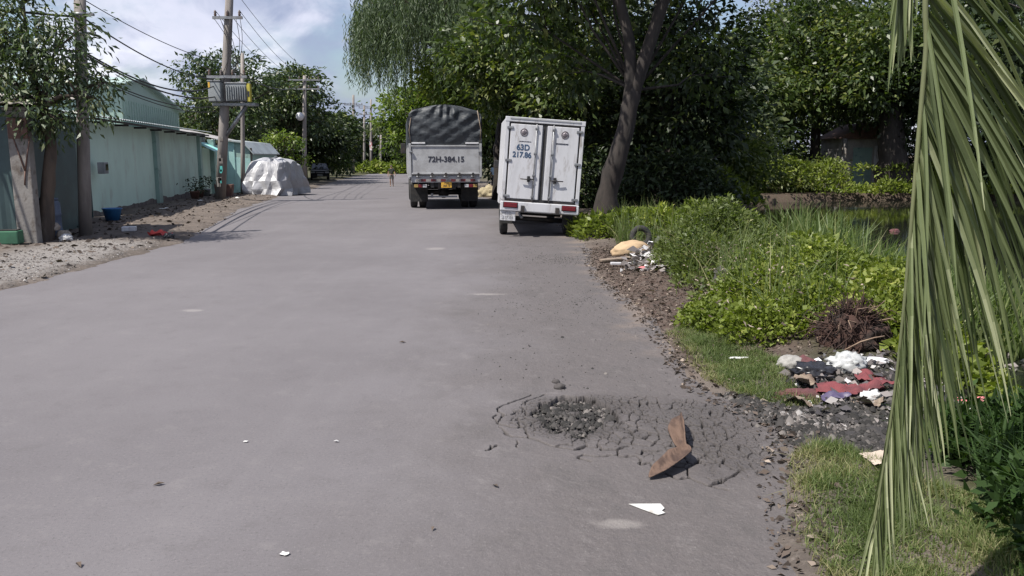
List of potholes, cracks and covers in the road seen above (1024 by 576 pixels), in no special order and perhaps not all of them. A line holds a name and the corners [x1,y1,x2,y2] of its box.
pothole [532,397,617,442]
crack [485,390,795,501]
